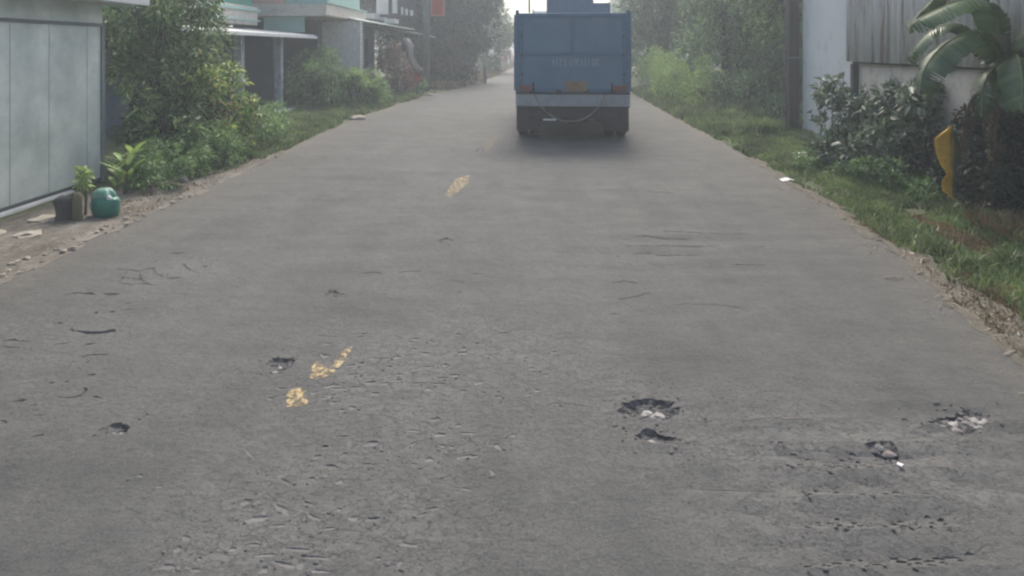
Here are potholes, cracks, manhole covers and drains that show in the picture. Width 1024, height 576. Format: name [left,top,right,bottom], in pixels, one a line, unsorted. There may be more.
pothole [258,348,296,375]
pothole [864,439,901,464]
pothole [613,395,707,428]
pothole [93,412,150,436]
crack [616,231,765,266]
crack [2,233,212,399]
